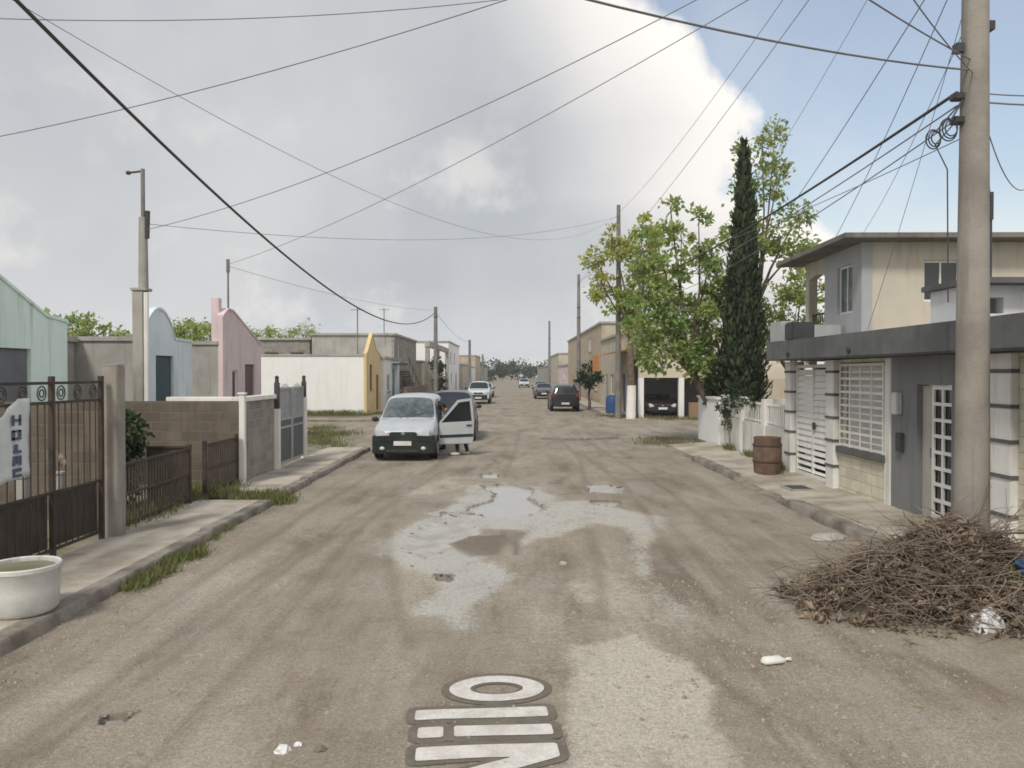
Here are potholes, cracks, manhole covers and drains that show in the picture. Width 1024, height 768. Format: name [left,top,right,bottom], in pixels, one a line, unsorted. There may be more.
pothole [572,482,638,496]
pothole [449,482,559,522]
pothole [468,472,512,480]
